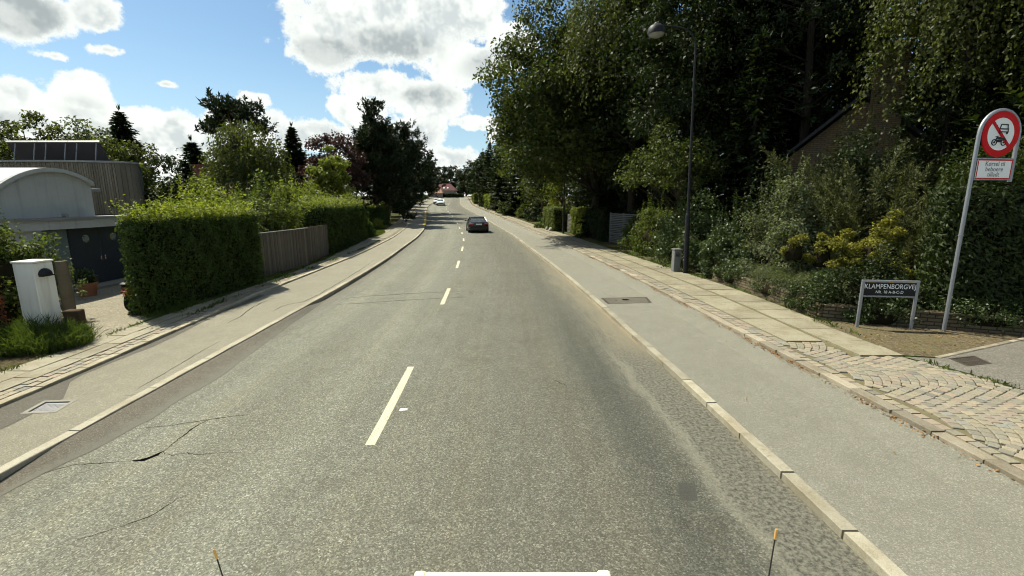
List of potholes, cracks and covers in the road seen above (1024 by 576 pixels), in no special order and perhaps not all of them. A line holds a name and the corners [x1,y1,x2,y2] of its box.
crack [46,414,248,473]
manhole cover [20,400,76,414]
crack [77,496,184,540]
drain grate [949,356,992,366]
crack [228,263,456,323]
